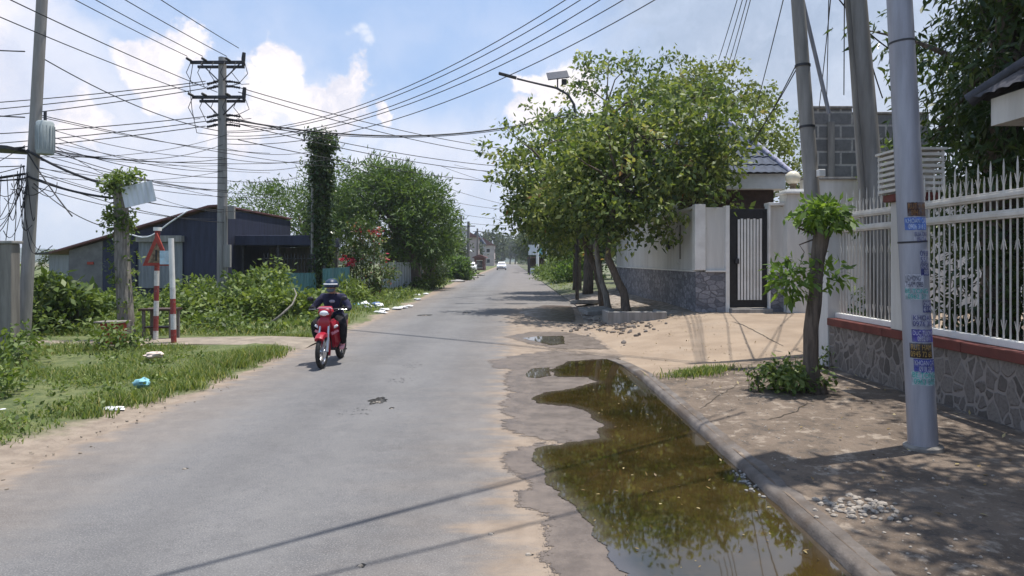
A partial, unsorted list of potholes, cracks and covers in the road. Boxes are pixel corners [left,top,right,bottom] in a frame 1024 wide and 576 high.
pothole [368,397,388,405]
